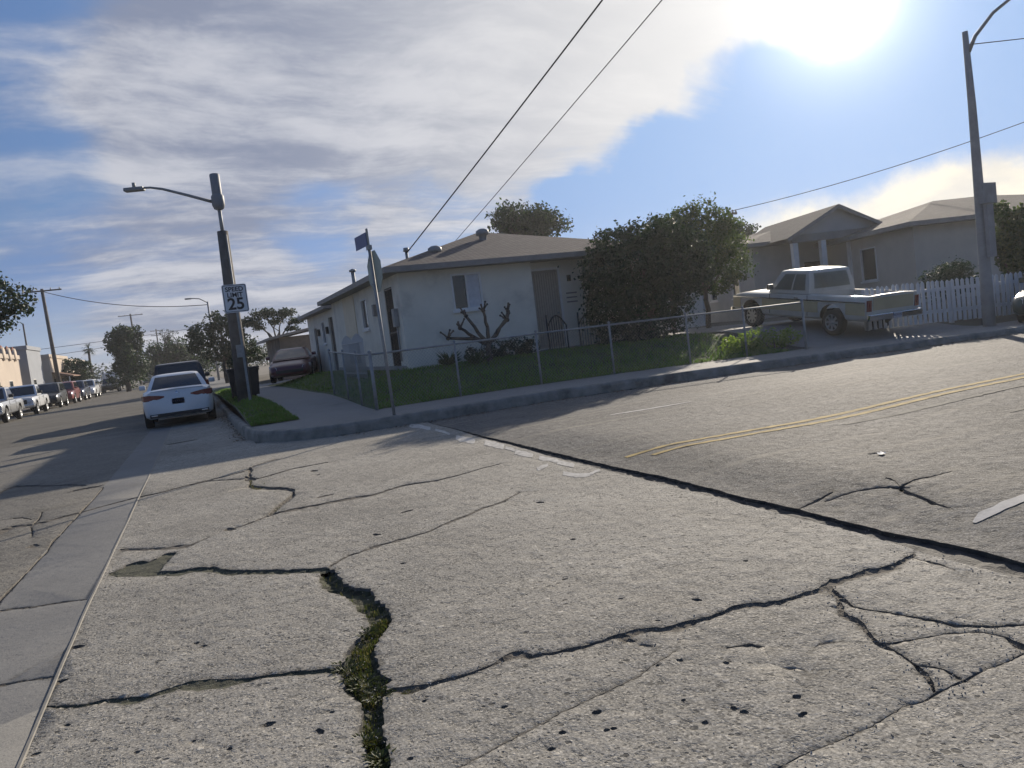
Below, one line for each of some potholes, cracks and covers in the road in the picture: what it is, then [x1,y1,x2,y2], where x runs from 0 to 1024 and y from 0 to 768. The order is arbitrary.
crack [0,459,1024,768]
